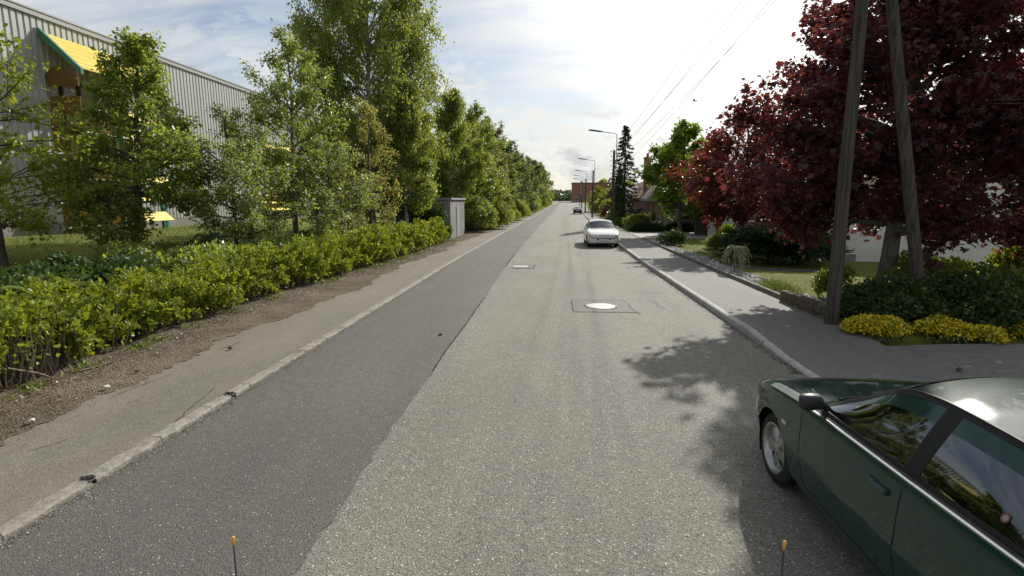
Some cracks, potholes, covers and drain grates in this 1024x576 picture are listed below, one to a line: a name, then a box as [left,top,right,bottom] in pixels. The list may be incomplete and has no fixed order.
manhole cover [571,299,636,312]
